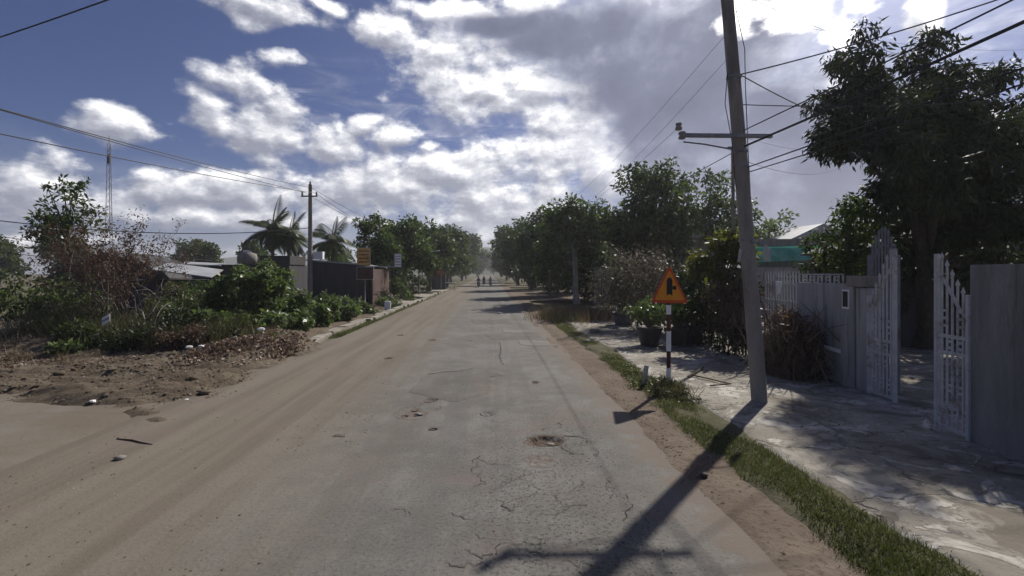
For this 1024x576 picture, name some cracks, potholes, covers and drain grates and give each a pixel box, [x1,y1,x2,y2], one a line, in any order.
pothole [393,407,427,420]
pothole [523,435,564,447]
crack [448,514,595,567]
crack [471,422,599,516]
